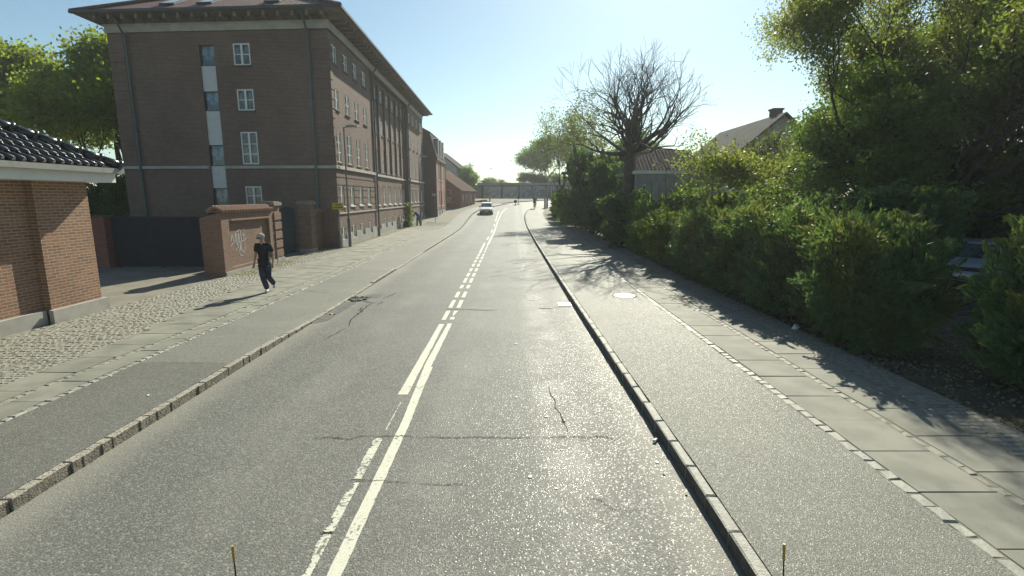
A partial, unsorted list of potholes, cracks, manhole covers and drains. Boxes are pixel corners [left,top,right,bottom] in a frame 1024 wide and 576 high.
crack [548,389,615,440]
